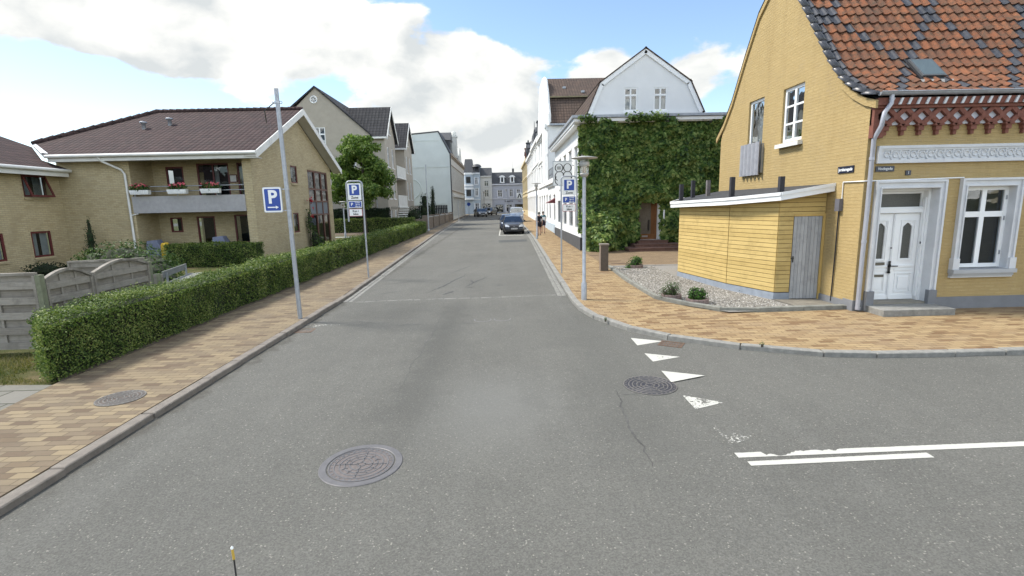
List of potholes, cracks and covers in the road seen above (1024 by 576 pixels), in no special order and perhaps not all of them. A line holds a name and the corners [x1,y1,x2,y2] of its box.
manhole cover [93,390,147,407]
manhole cover [623,376,678,395]
manhole cover [318,444,403,487]
crack [613,387,653,466]
